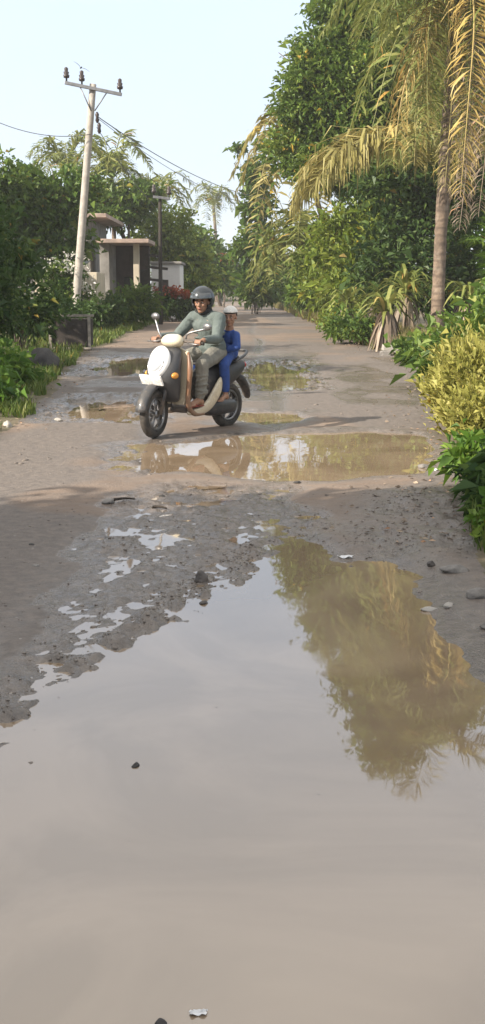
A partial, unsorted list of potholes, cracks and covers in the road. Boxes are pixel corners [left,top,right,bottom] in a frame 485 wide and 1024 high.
pothole [63,404,323,429]
pothole [0,488,485,1024]
pothole [39,392,152,423]
pothole [107,422,449,497]
pothole [75,356,149,376]
